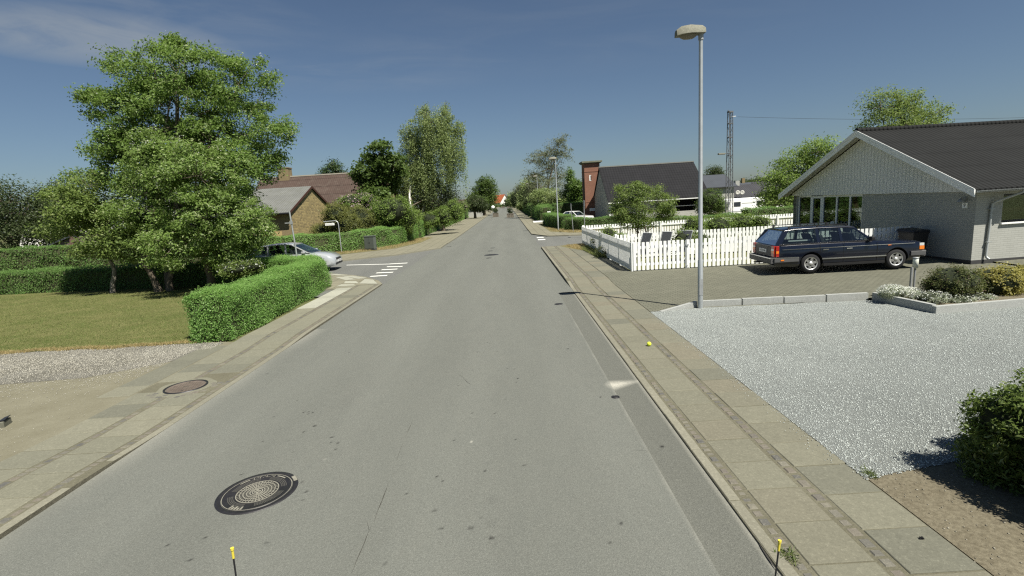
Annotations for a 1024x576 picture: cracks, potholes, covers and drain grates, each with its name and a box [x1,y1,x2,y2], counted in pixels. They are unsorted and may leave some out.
manhole cover [163,379,208,394]
manhole cover [214,472,298,515]
